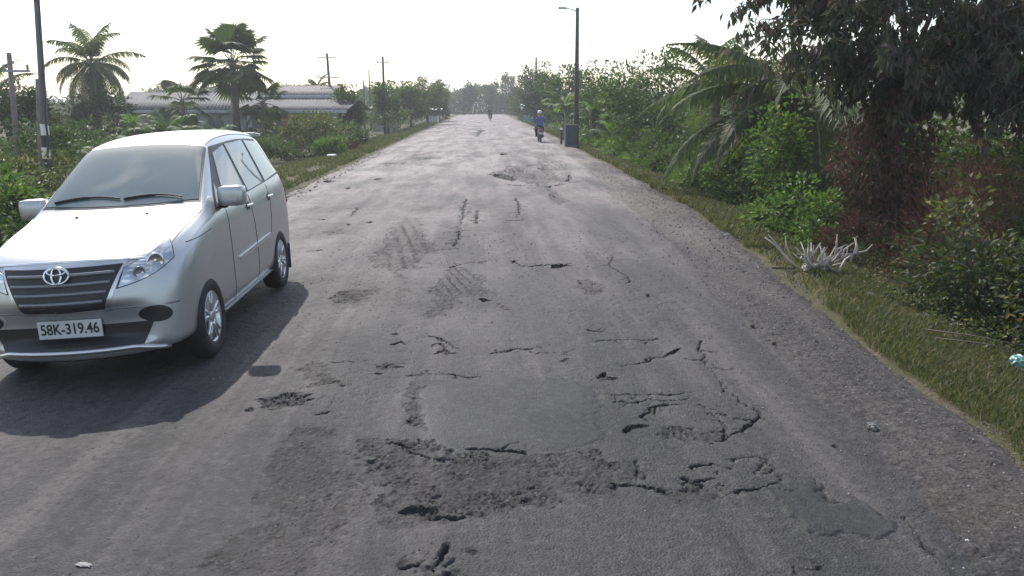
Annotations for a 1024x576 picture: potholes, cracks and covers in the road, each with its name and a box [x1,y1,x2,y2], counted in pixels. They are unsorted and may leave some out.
crack [715,405,766,462]
crack [610,463,715,495]
pothole [397,505,440,521]
crack [721,463,783,495]
crack [615,394,675,419]
crack [443,199,483,268]
